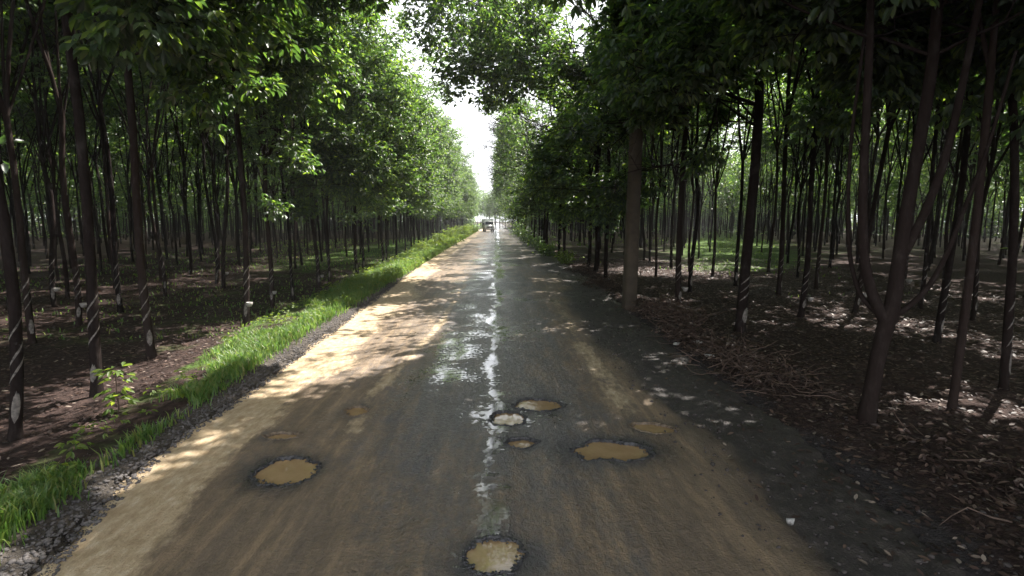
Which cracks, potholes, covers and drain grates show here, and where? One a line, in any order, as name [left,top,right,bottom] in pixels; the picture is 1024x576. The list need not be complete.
pothole [511,397,568,412]
pothole [461,534,529,576]
pothole [261,431,304,440]
pothole [628,421,683,434]
pothole [568,438,657,463]
pothole [343,405,370,417]
pothole [248,455,322,488]
pothole [488,410,528,426]
pothole [503,436,541,449]
